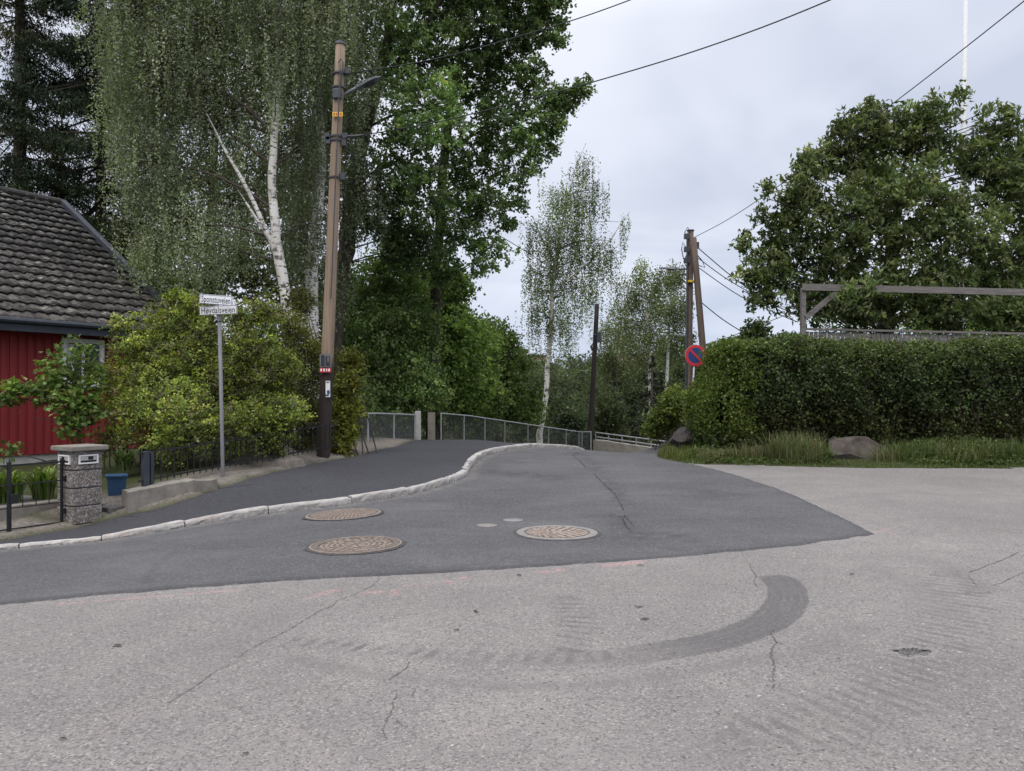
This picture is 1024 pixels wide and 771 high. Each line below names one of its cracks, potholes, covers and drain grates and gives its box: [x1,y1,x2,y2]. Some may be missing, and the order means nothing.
manhole cover [304,536,407,555]
crack [770,630,782,689]
manhole cover [513,525,602,541]
crack [382,661,414,739]
crack [965,552,1021,593]
crack [168,578,381,703]
manhole cover [302,508,384,521]
pothole [881,646,940,660]
